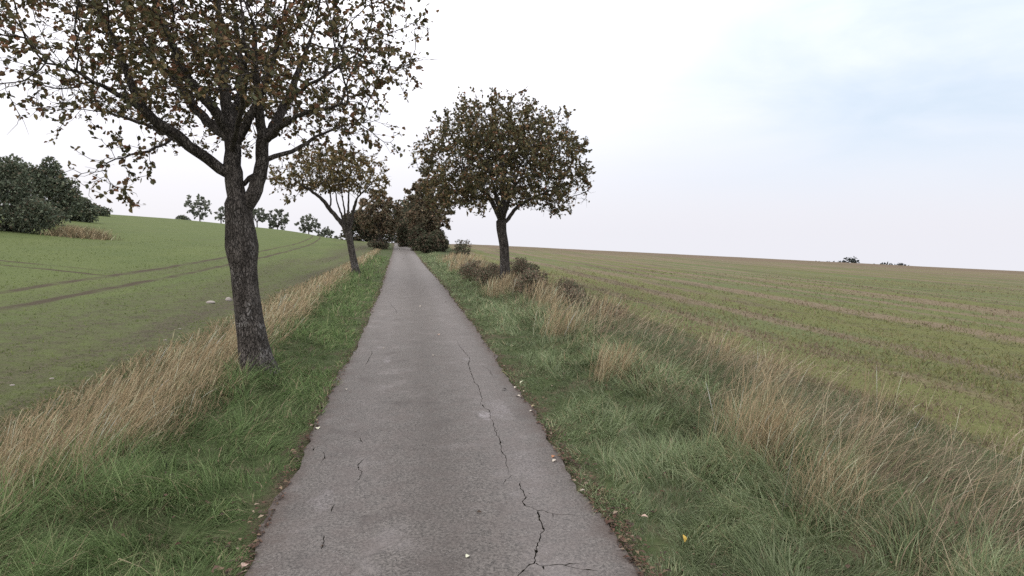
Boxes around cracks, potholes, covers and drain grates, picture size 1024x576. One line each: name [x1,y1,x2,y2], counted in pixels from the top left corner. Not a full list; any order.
crack [518,483,591,576]
crack [457,341,512,486]
